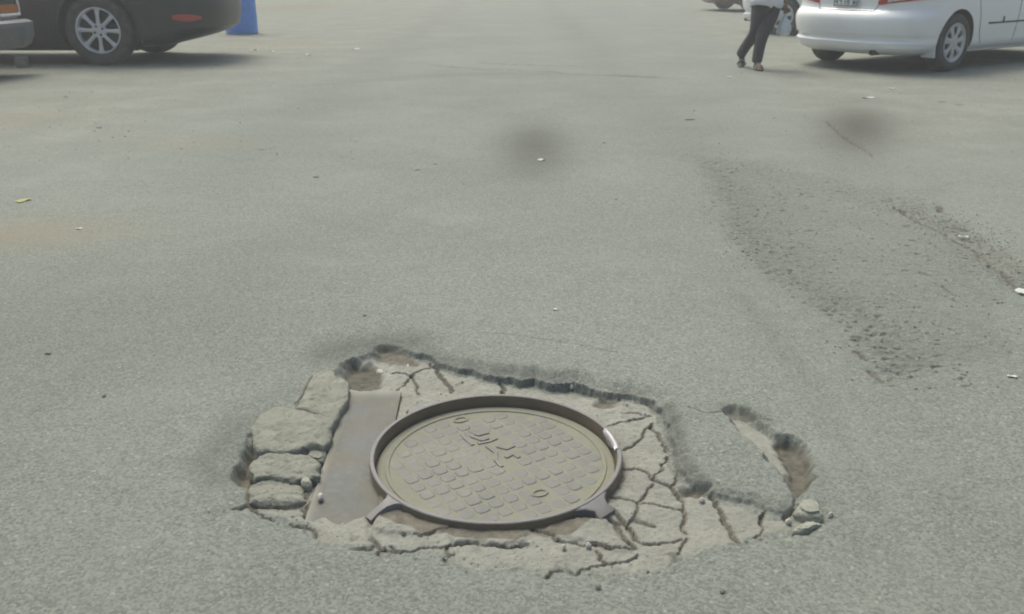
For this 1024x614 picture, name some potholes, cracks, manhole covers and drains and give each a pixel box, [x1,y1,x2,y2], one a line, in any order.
crack [441,63,657,78]
crack [828,122,876,157]
pothole [234,348,830,588]
manhole cover [365,394,624,531]
crack [232,368,785,570]
